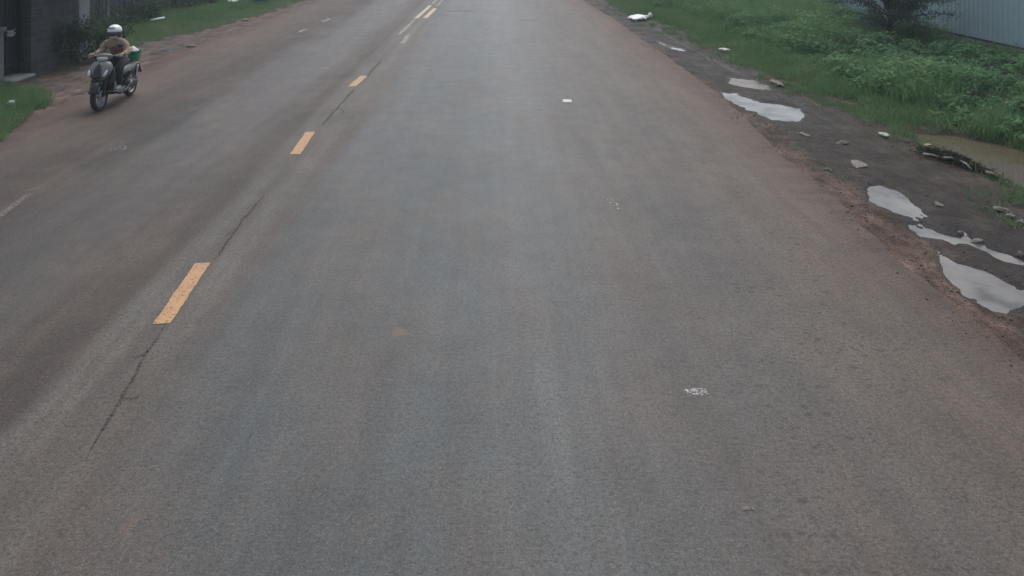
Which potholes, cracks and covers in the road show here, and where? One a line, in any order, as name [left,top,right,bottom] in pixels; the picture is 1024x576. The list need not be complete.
crack [90,326,165,450]
